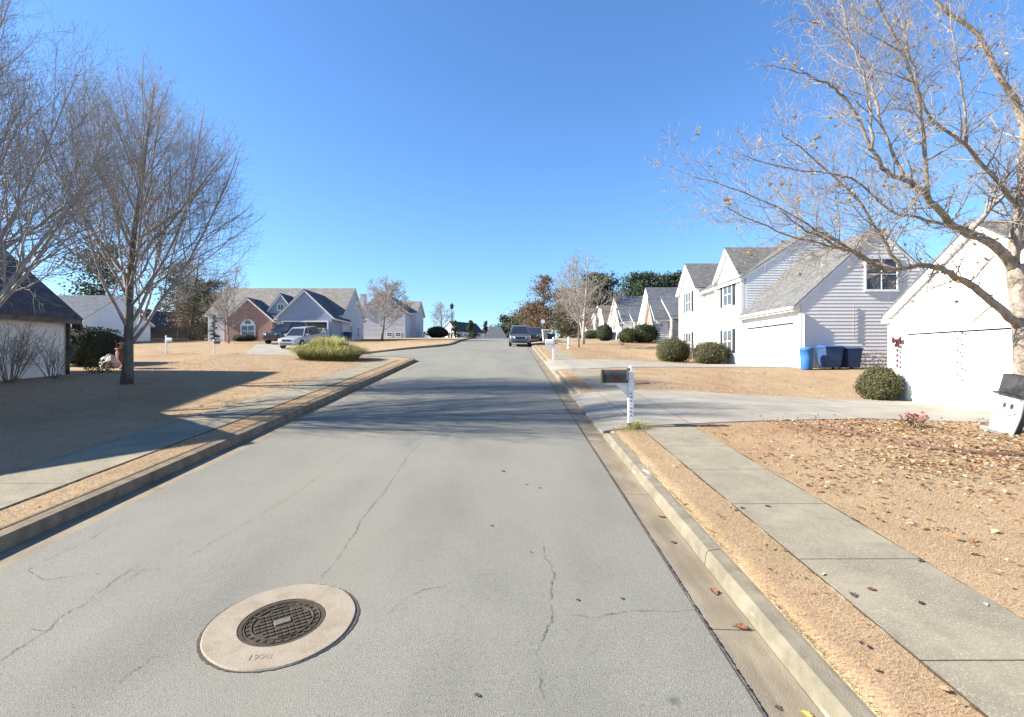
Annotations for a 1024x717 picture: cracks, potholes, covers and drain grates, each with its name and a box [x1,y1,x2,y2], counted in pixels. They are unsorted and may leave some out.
manhole cover [196,584,360,673]
crack [537,548,554,695]
crack [1,473,325,660]
